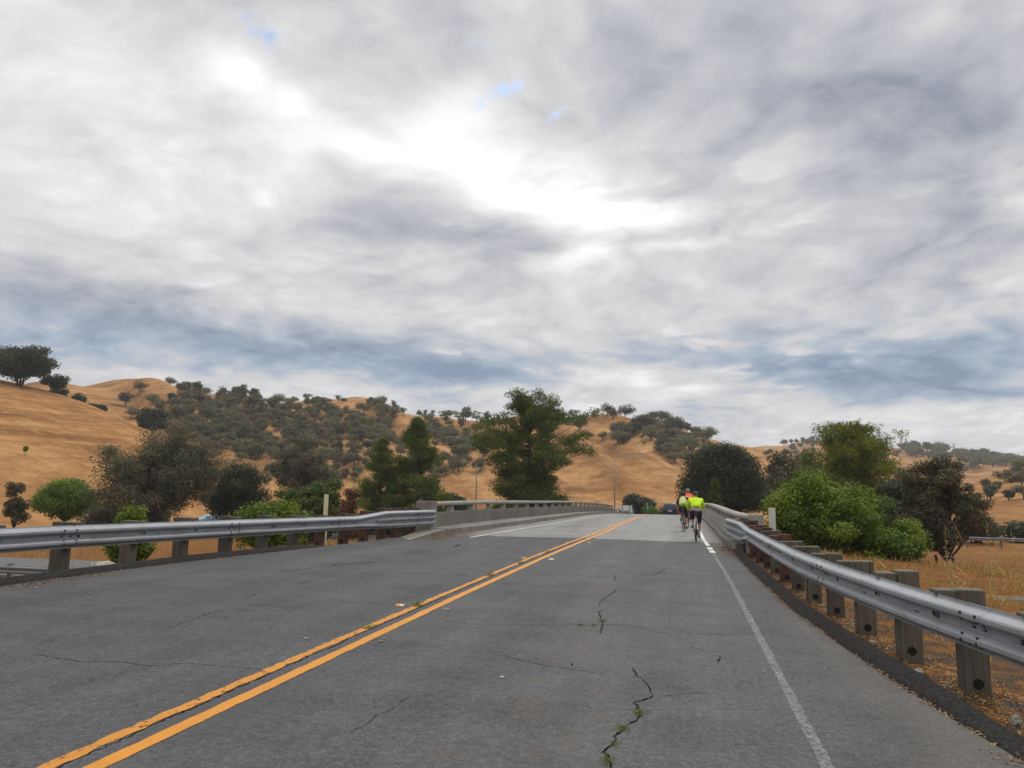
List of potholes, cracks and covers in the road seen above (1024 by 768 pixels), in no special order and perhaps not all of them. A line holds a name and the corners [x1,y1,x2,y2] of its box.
crack [443,572,721,663]
crack [34,654,263,670]
crack [588,668,715,768]
